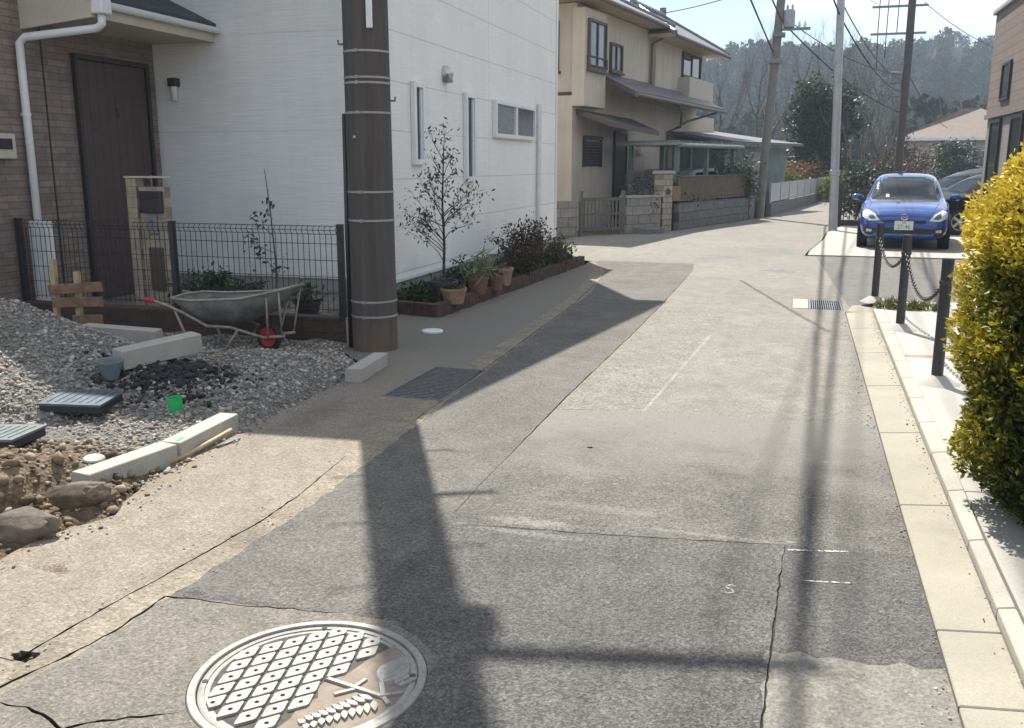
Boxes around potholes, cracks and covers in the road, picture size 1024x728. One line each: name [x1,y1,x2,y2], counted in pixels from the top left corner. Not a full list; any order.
pothole [10,650,40,663]
crack [0,457,344,728]
crack [760,547,785,728]
manhole cover [186,621,427,728]
drain grate [381,366,489,401]
